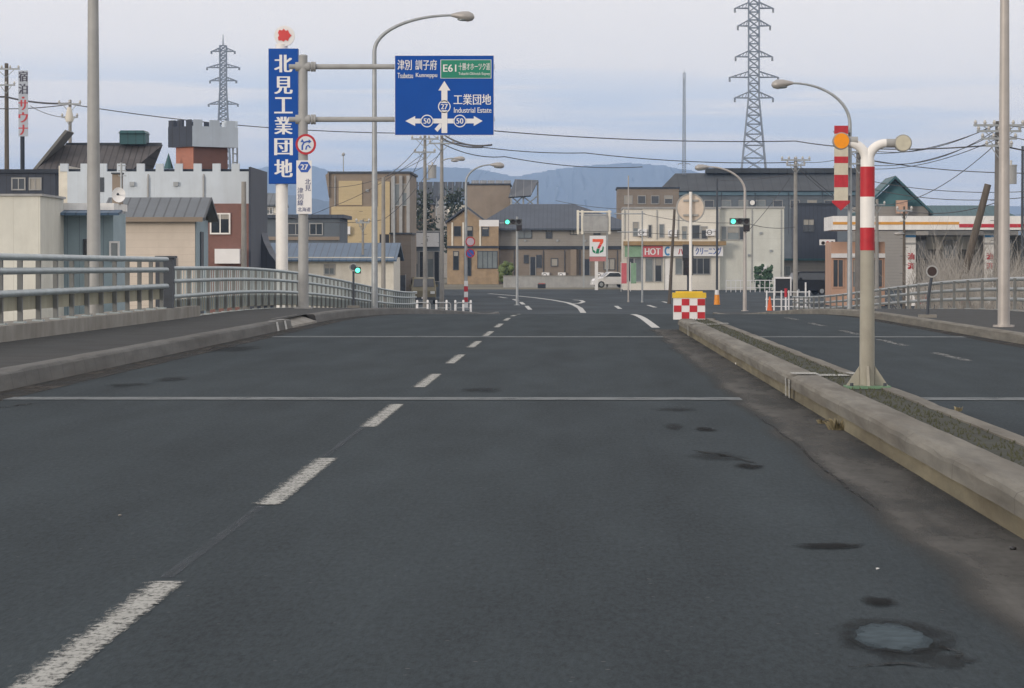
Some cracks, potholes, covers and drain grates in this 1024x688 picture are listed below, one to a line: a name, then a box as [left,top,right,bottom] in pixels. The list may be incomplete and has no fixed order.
pothole [867,597,892,605]
pothole [852,623,934,652]
crack [759,417,879,511]
